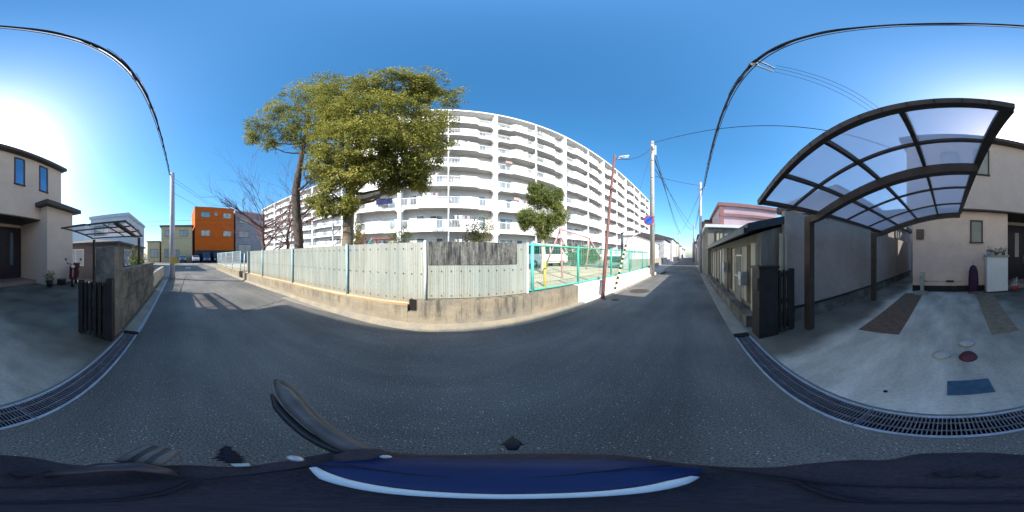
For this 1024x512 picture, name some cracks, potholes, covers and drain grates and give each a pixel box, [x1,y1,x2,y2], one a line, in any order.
drain grate [94,333,137,367]
drain grate [14,361,113,420]
drain grate [762,366,873,426]
drain grate [736,336,782,372]
